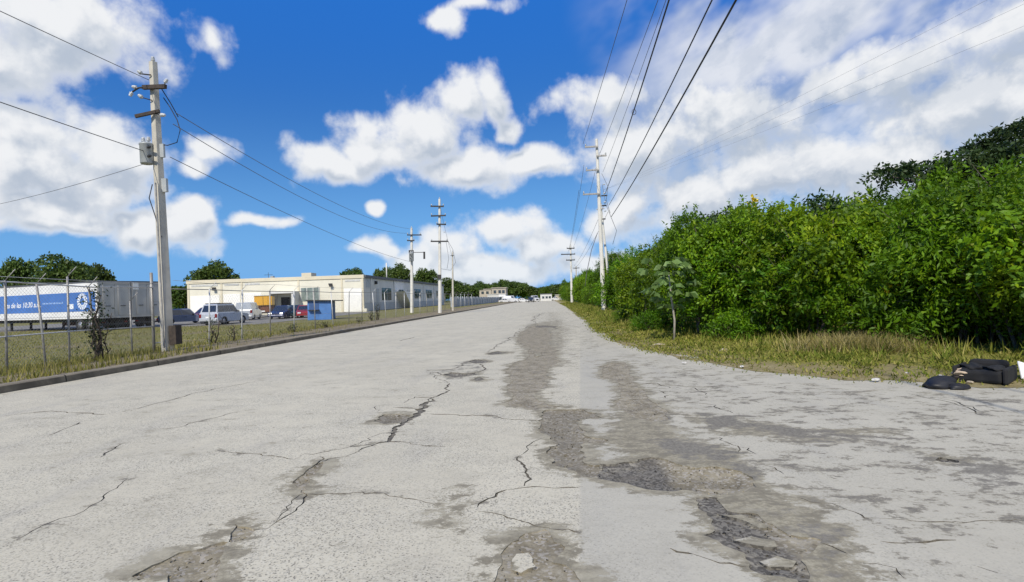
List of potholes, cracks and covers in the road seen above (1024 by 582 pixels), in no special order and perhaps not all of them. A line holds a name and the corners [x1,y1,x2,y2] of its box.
crack [256,437,583,532]
crack [8,382,249,435]
crack [219,363,537,461]
pothole [696,497,822,582]
crack [8,480,125,544]
pothole [494,529,581,582]
pothole [597,457,756,495]
